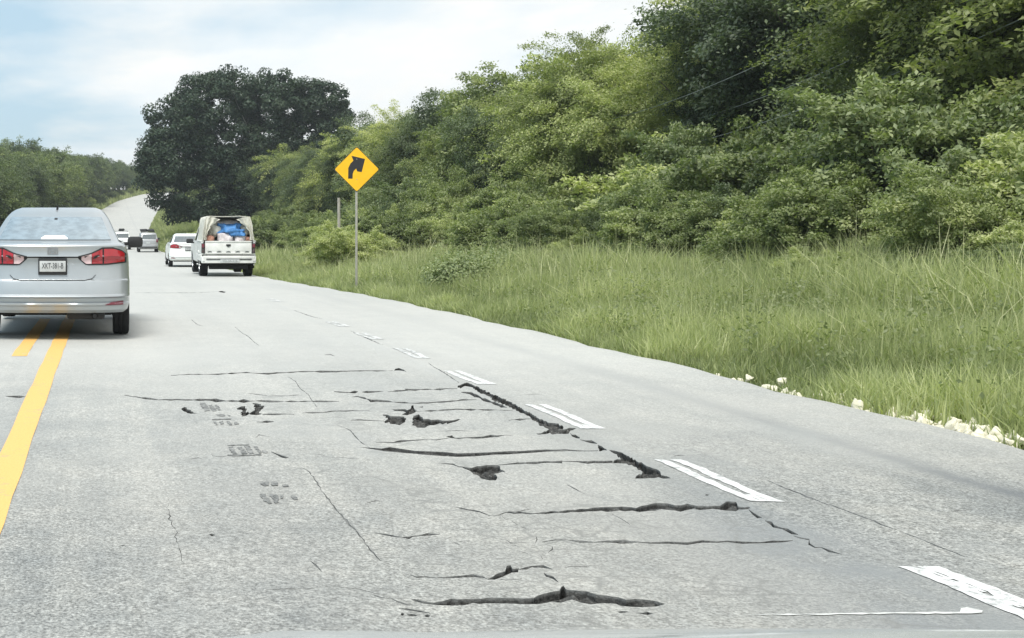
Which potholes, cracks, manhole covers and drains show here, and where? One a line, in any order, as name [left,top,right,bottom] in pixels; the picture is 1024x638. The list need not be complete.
pothole [411,414,461,428]
pothole [383,414,406,425]
crack [767,480,962,556]
pothole [438,463,505,480]
crack [125,354,842,582]
